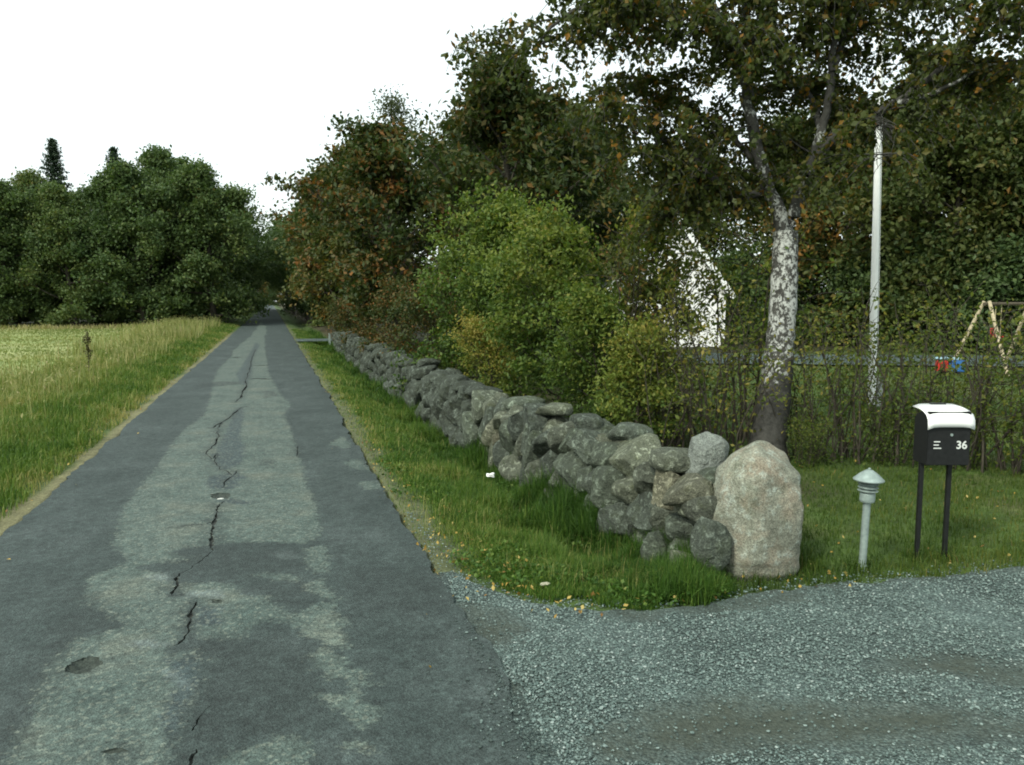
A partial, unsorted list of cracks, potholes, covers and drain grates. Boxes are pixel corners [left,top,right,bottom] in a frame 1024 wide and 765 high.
crack [170,353,263,646]
pothole [65,656,103,674]
crack [189,749,198,765]
